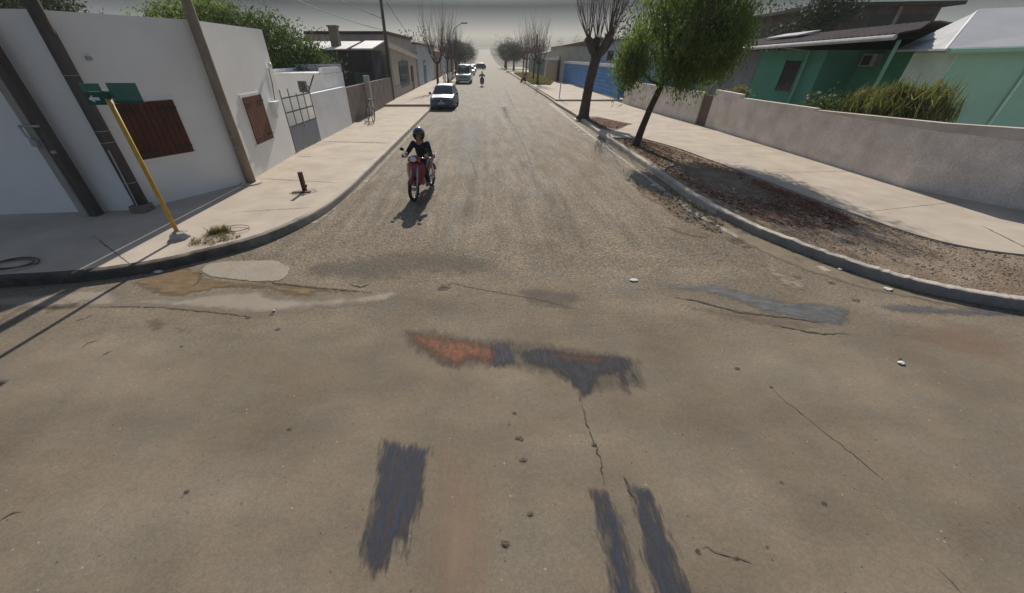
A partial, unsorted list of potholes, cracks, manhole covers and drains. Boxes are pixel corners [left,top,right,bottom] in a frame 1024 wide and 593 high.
crack [78,306,271,320]
crack [582,406,606,486]
crack [769,386,878,475]
crack [672,296,848,335]
